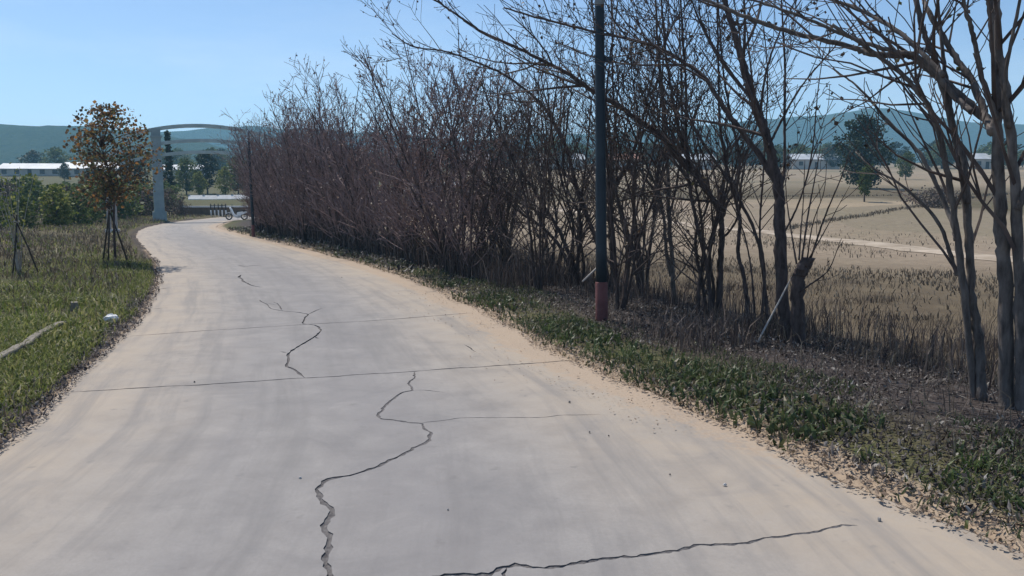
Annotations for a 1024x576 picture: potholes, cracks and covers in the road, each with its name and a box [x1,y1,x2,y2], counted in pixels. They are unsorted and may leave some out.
crack [238,265,322,378]
crack [315,372,857,576]
